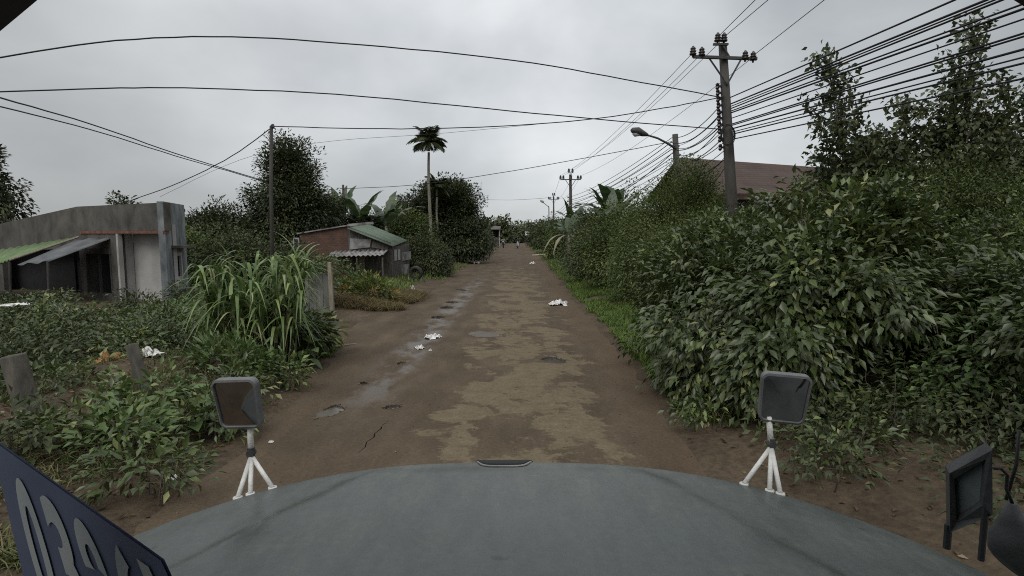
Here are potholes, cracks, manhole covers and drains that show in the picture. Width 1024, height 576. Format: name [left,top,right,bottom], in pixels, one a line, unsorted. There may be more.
pothole [540,356,567,364]
pothole [313,403,346,420]
